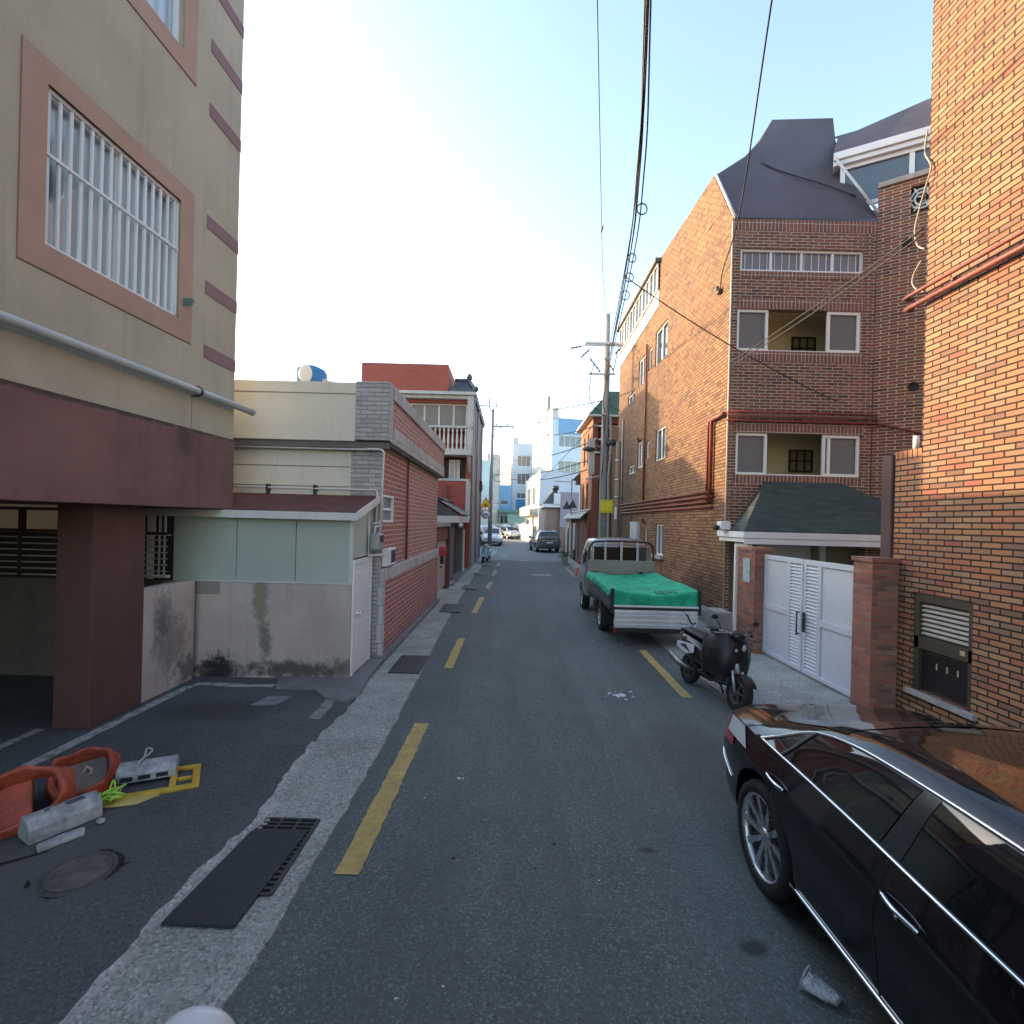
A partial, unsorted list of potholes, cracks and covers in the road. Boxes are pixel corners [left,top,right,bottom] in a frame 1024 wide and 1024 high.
drain grate [254,817,320,896]
manhole cover [36,852,118,895]
